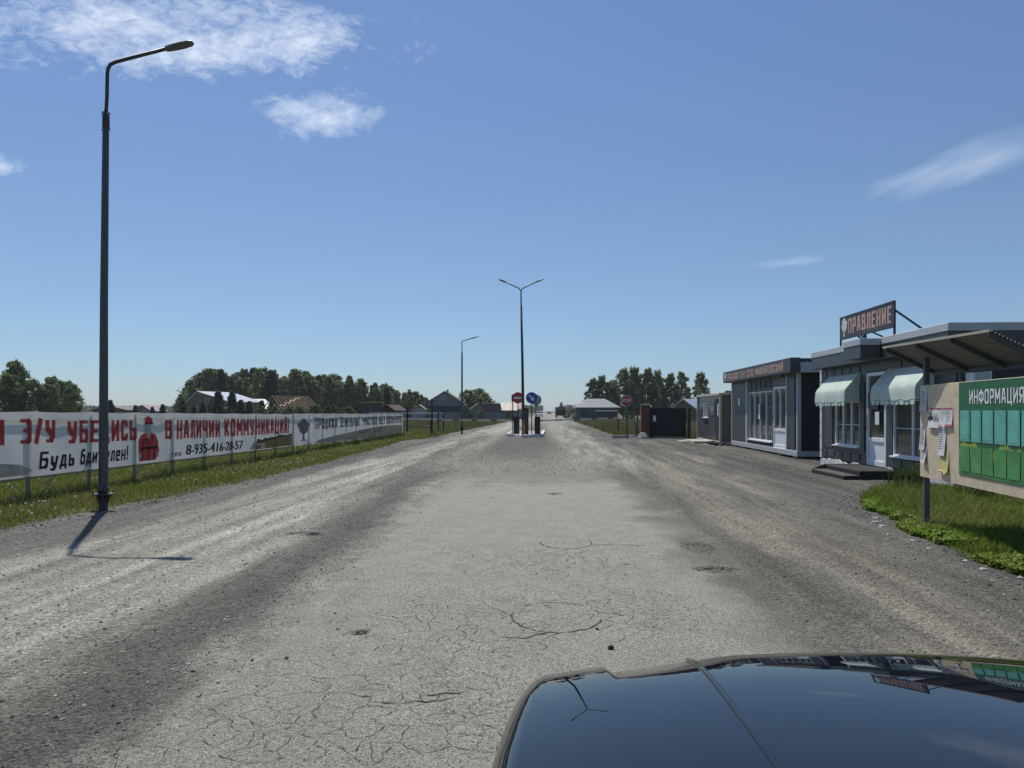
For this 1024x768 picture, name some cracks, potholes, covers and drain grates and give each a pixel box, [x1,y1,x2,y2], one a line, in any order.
pothole [677,542,721,555]
crack [91,659,549,768]
crack [327,536,724,676]
